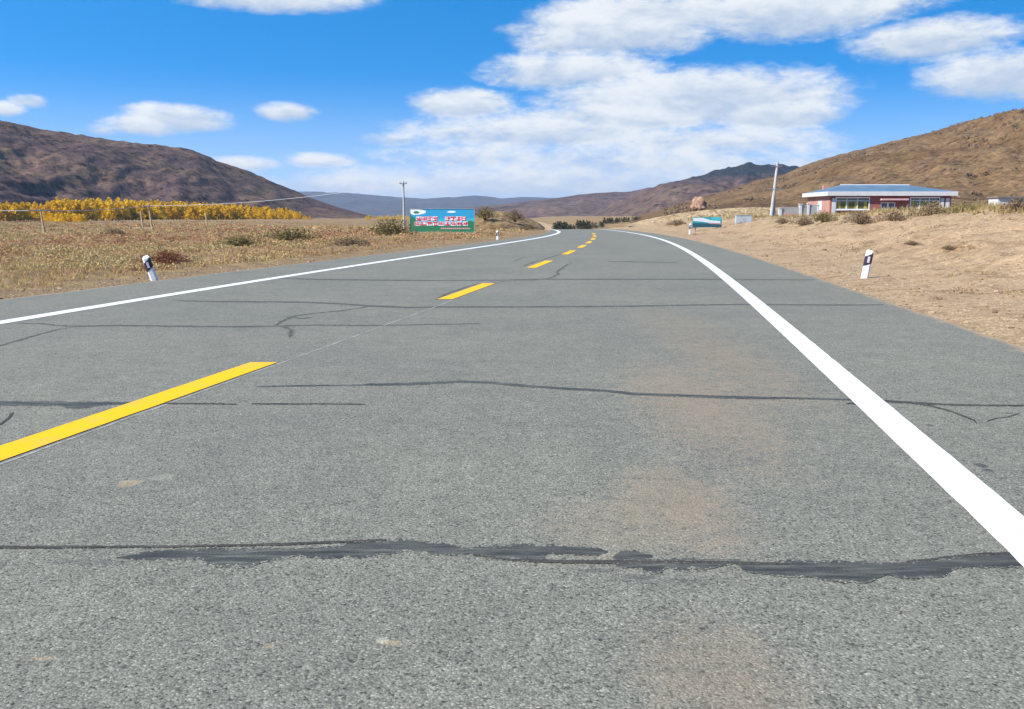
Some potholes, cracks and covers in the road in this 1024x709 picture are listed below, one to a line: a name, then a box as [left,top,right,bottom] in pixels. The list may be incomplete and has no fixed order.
crack [0,253,884,346]
